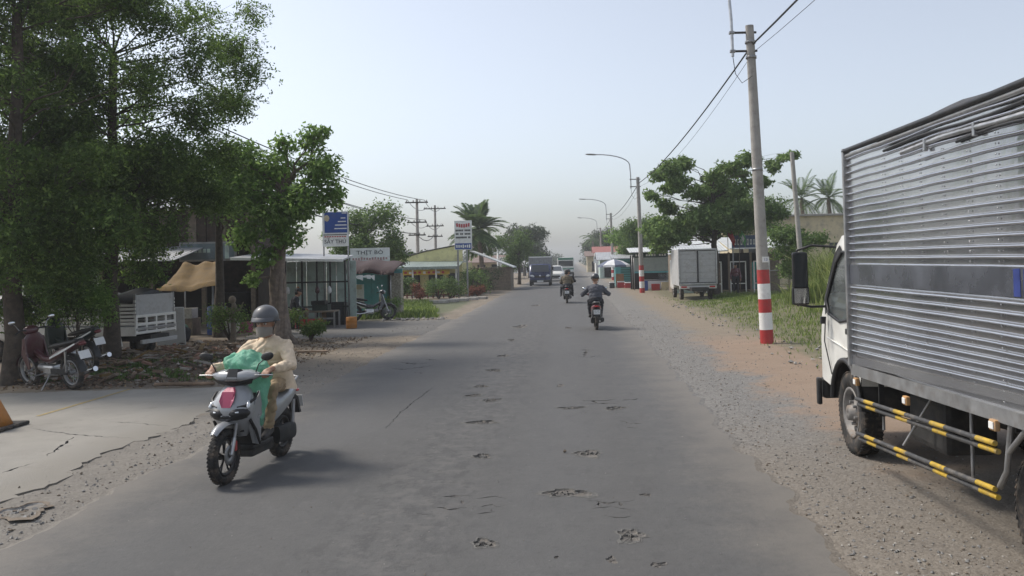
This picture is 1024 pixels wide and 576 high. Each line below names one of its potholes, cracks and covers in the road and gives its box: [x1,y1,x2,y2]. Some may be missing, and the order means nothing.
pothole [571,449,603,459]
pothole [535,488,599,498]
pothole [0,501,54,521]
crack [415,495,508,515]
pothole [614,528,650,544]
pothole [470,537,499,549]
crack [5,422,166,472]
